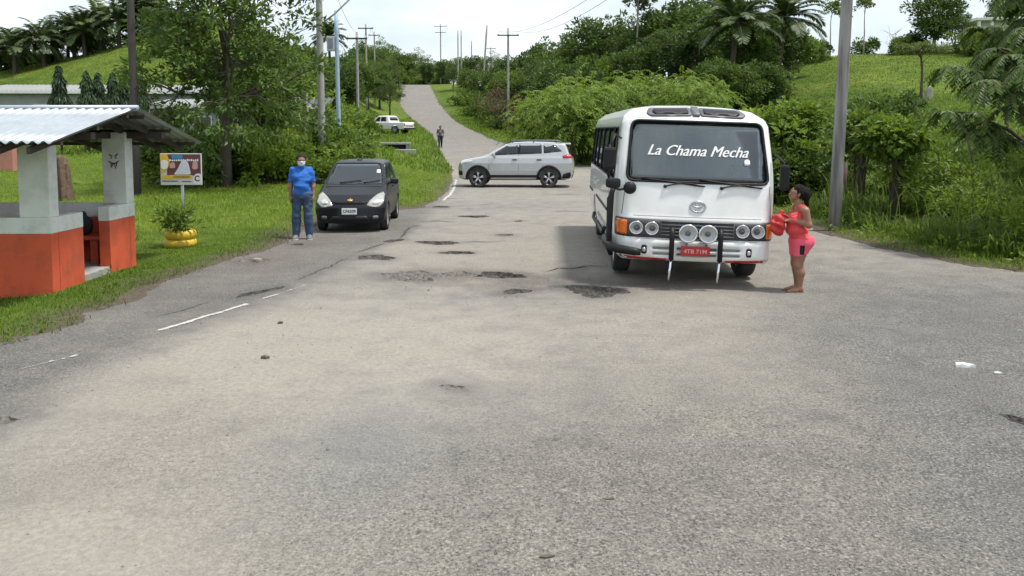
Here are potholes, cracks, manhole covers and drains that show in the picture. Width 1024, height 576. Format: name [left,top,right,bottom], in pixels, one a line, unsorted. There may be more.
pothole [236,286,285,298]
pothole [379,270,439,282]
pothole [998,414,1024,425]
pothole [564,285,631,298]
pothole [0,416,20,425]
